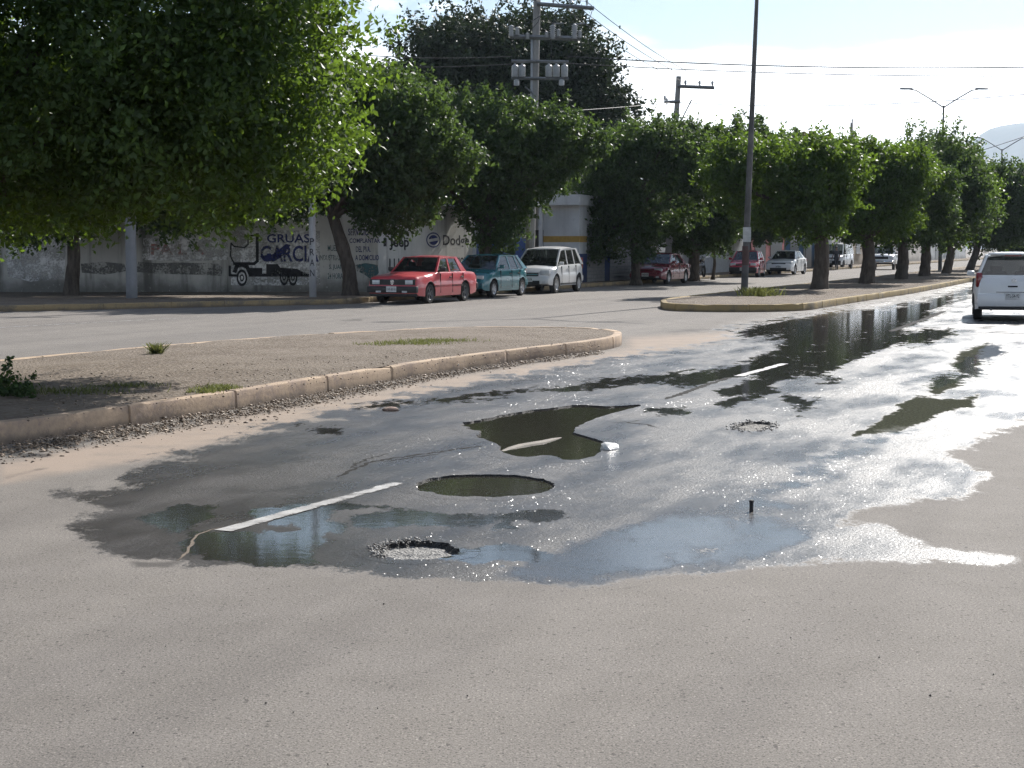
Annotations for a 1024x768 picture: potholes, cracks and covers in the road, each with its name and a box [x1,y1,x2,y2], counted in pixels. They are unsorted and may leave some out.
pothole [353,537,481,564]
pothole [395,472,574,501]
pothole [442,403,657,463]
pothole [713,420,793,433]
crack [338,446,482,477]
